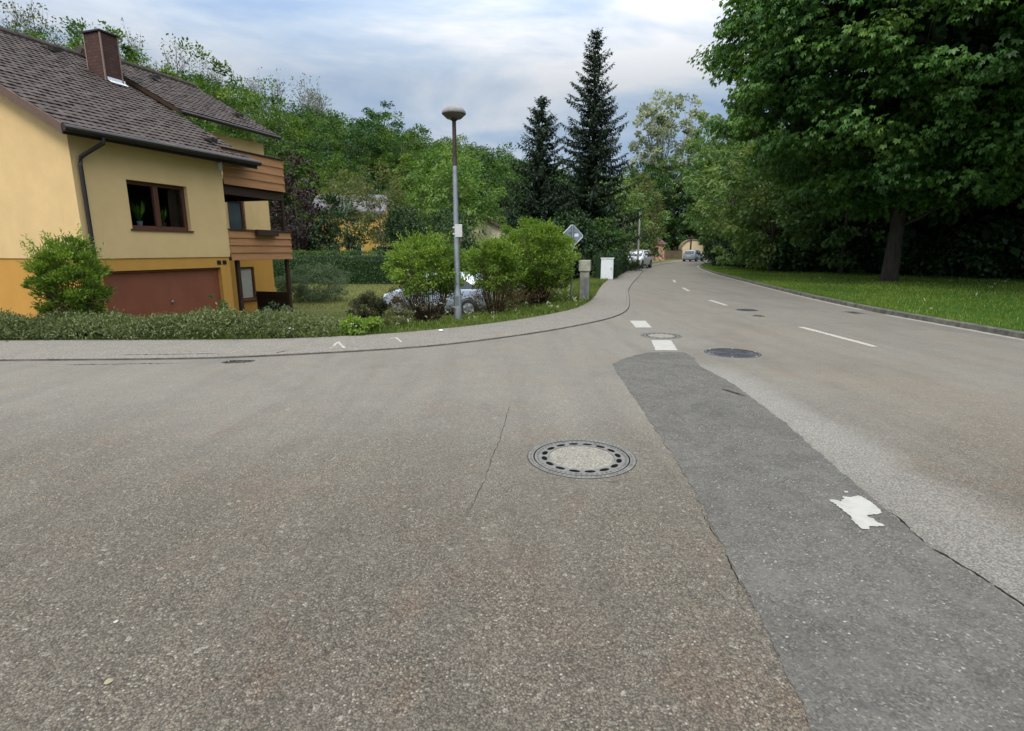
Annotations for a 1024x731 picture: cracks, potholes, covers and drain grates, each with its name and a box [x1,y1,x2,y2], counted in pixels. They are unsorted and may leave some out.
crack [465,407,510,520]
manhole cover [528,439,636,479]
manhole cover [704,348,761,358]
